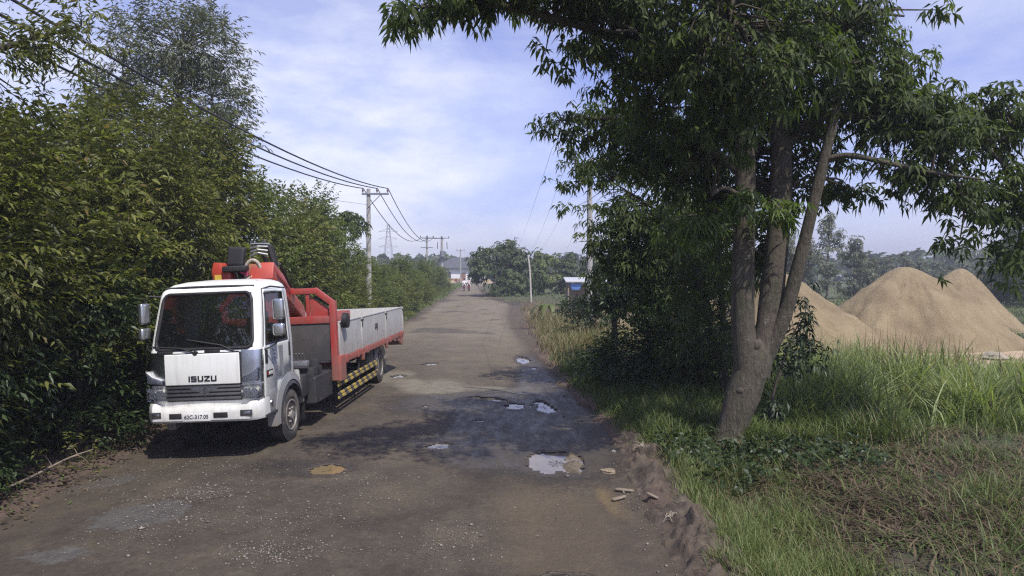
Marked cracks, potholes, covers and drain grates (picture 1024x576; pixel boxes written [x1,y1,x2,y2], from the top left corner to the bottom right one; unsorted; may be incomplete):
pothole [495,401,539,411]
pothole [516,448,596,479]
pothole [512,354,536,366]
pothole [524,396,565,418]
pothole [297,462,357,478]
